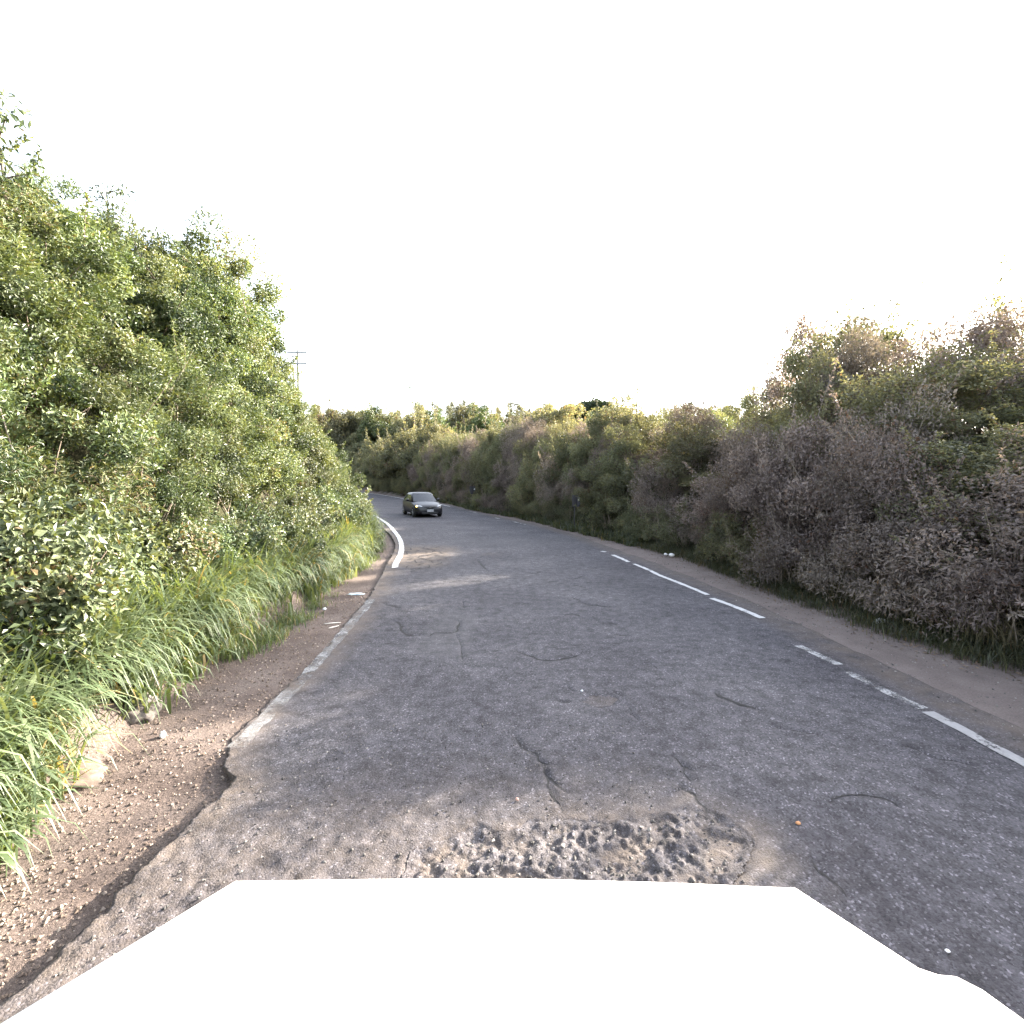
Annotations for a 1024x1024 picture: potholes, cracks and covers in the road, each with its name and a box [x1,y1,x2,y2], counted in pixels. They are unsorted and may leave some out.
crack [812,861,847,897]
crack [715,693,826,738]
crack [514,649,581,661]
crack [674,757,708,813]
crack [830,794,900,808]
pothole [401,808,754,885]
crack [515,738,565,810]
